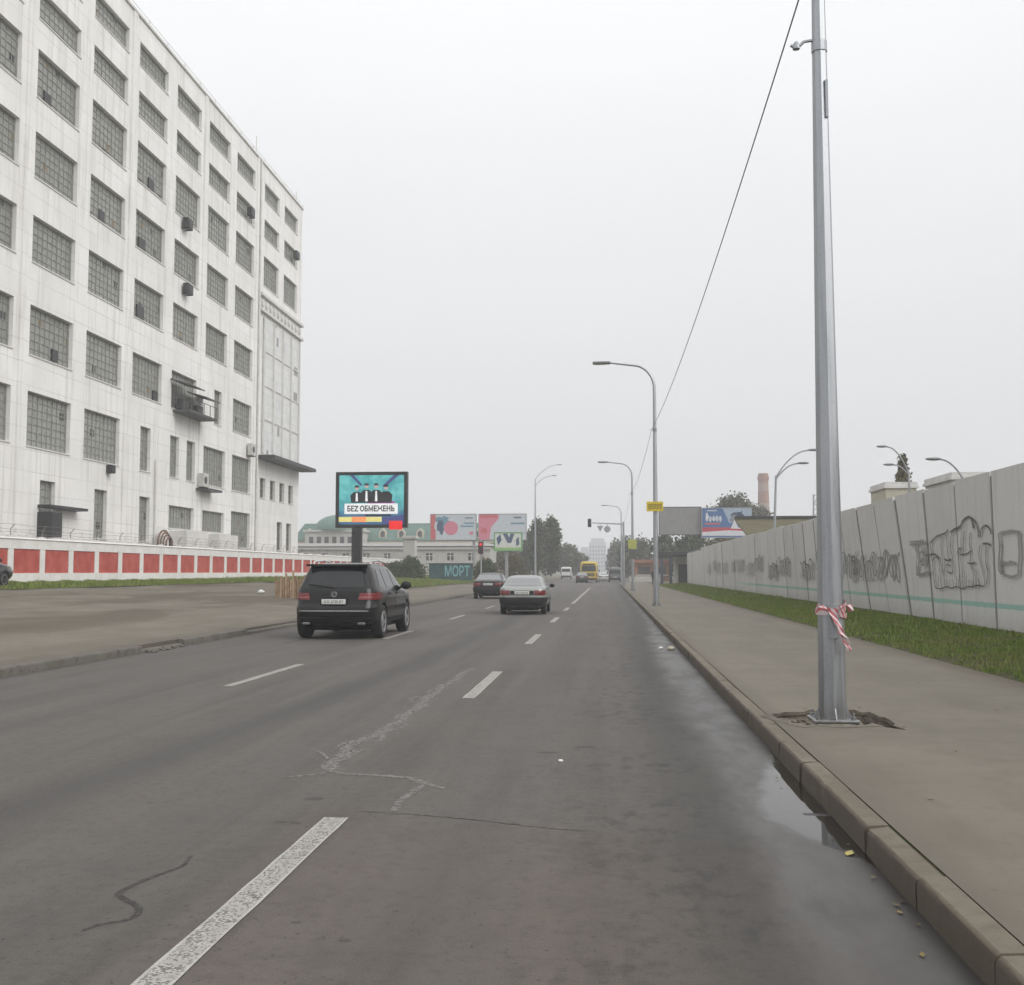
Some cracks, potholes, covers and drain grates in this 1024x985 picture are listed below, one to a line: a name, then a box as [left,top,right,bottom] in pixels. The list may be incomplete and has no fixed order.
crack [288,668,591,831]
pothole [762,710,907,730]
